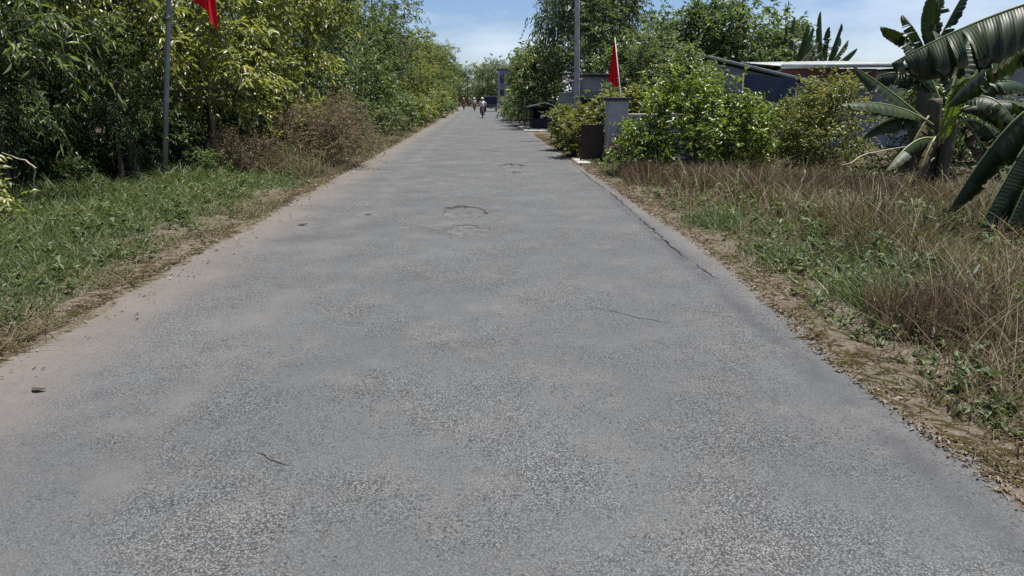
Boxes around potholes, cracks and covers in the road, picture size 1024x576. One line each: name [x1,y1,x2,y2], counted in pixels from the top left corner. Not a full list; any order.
crack [572,164,715,278]
pothole [441,204,488,219]
pothole [439,222,491,239]
crack [257,452,289,466]
